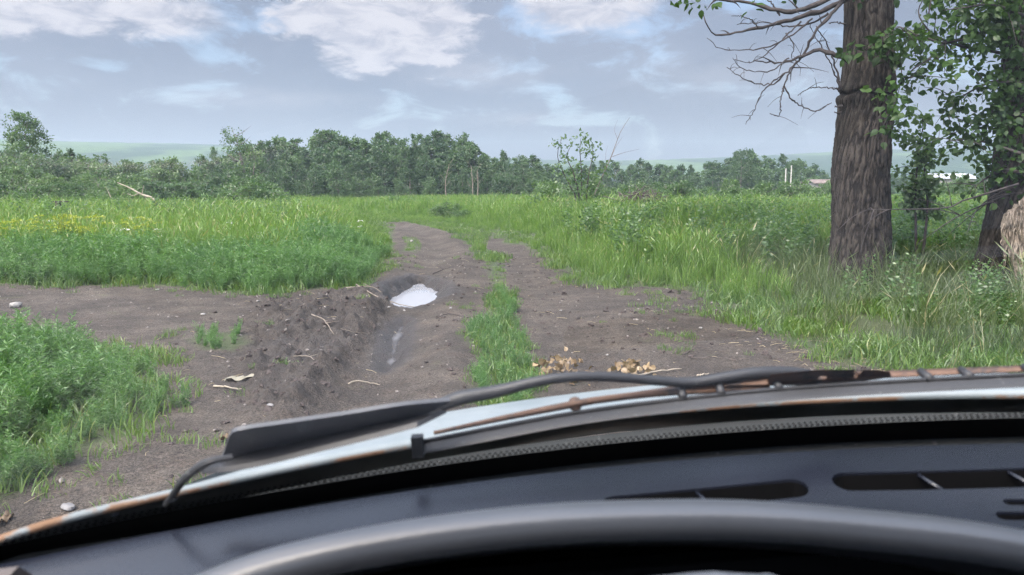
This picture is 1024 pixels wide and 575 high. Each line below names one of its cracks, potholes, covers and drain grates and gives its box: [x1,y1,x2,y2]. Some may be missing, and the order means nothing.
pothole [376,274,452,307]
